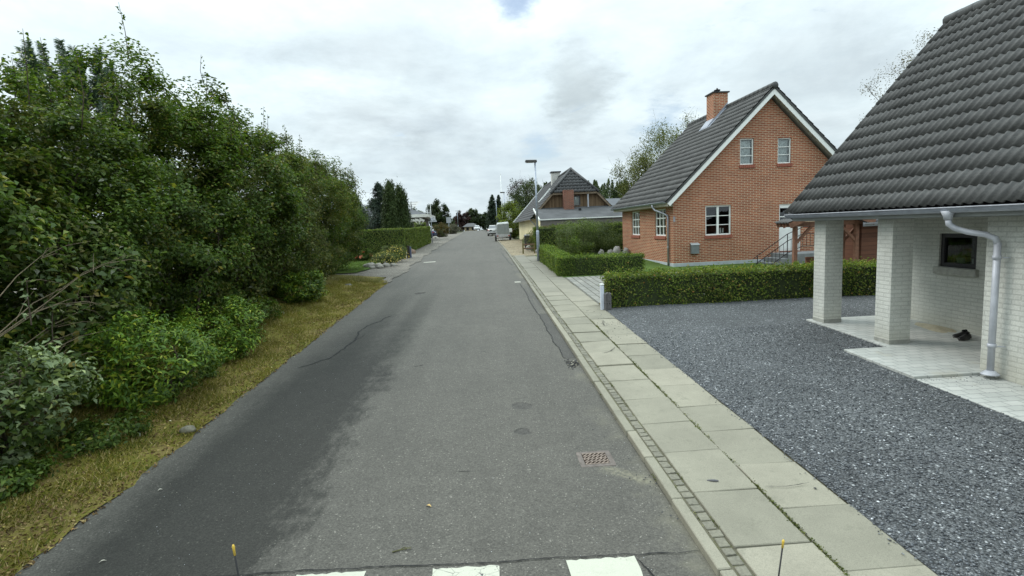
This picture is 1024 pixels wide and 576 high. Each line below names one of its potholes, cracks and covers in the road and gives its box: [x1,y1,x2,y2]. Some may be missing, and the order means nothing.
pothole [563,359,582,369]
crack [302,315,392,367]
drain grate [576,450,616,468]
